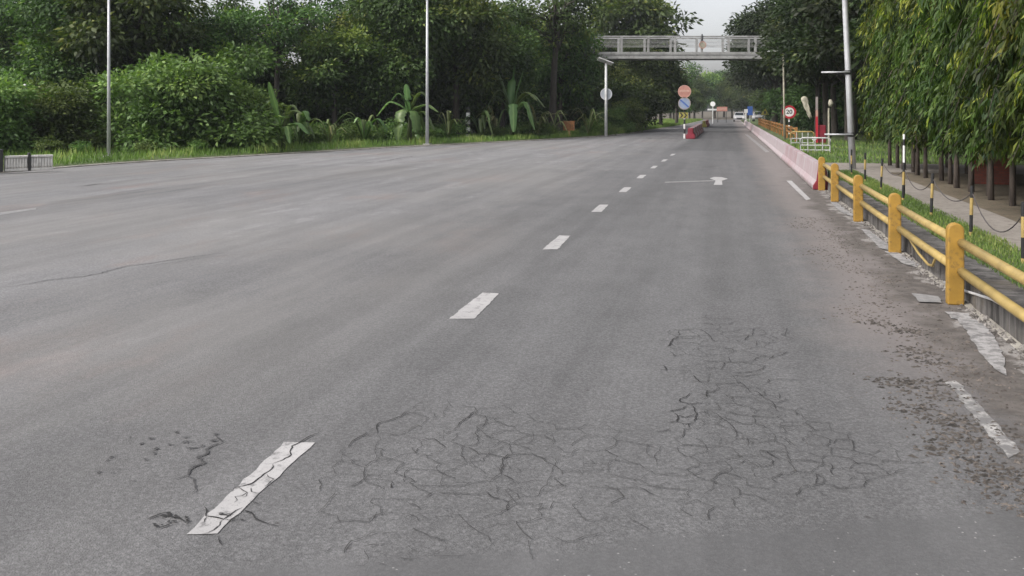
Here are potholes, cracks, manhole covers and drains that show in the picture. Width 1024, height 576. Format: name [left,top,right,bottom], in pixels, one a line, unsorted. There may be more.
crack [130,431,319,545]
crack [318,309,923,566]
